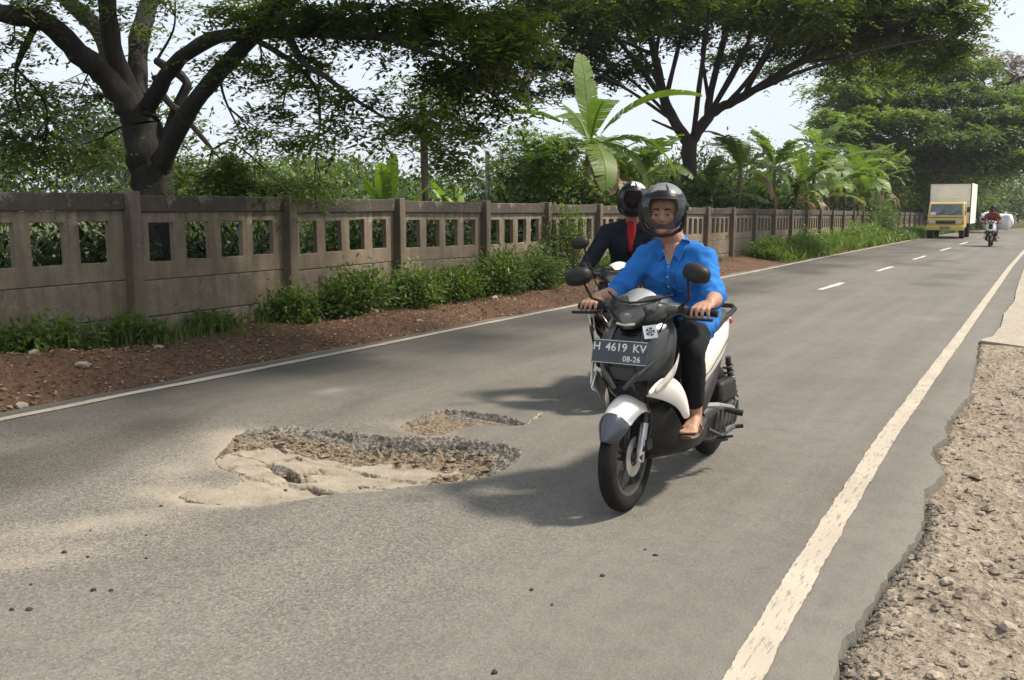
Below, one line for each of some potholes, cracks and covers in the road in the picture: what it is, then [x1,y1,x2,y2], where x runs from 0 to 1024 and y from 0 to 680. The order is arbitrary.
pothole [179,425,522,505]
pothole [400,409,528,436]
